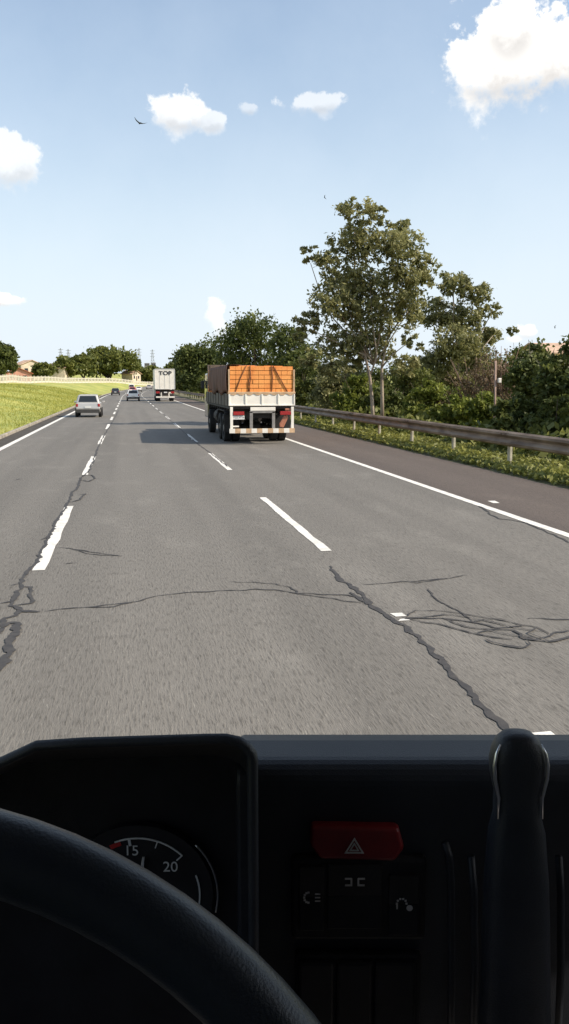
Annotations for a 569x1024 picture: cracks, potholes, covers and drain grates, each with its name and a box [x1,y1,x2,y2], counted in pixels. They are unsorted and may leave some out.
crack [48,581,365,611]
crack [377,575,463,584]
crack [479,506,568,542]
crack [61,547,120,567]
